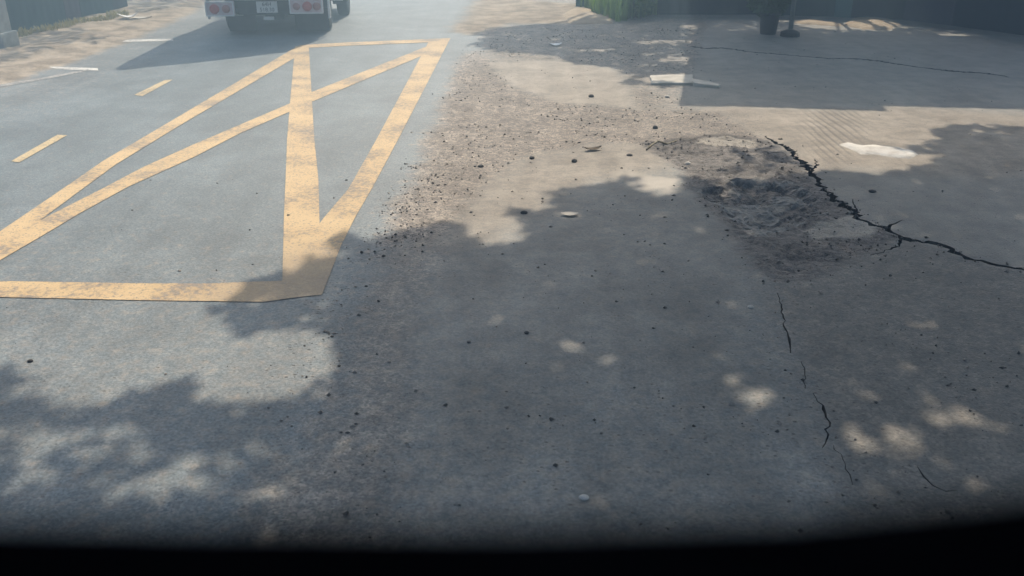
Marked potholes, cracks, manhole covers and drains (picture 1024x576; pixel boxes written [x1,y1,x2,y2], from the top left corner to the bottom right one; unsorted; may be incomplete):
crack [767,138,1024,270]
pothole [697,178,831,237]
crack [692,46,1007,77]
